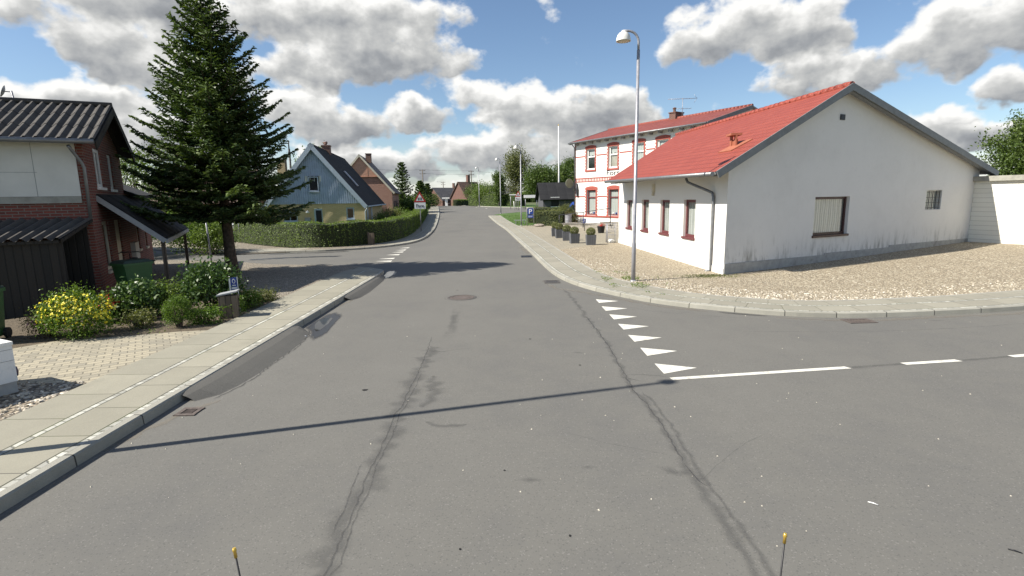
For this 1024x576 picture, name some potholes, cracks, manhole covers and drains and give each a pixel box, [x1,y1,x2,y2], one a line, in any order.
drain grate [173,407,205,416]
